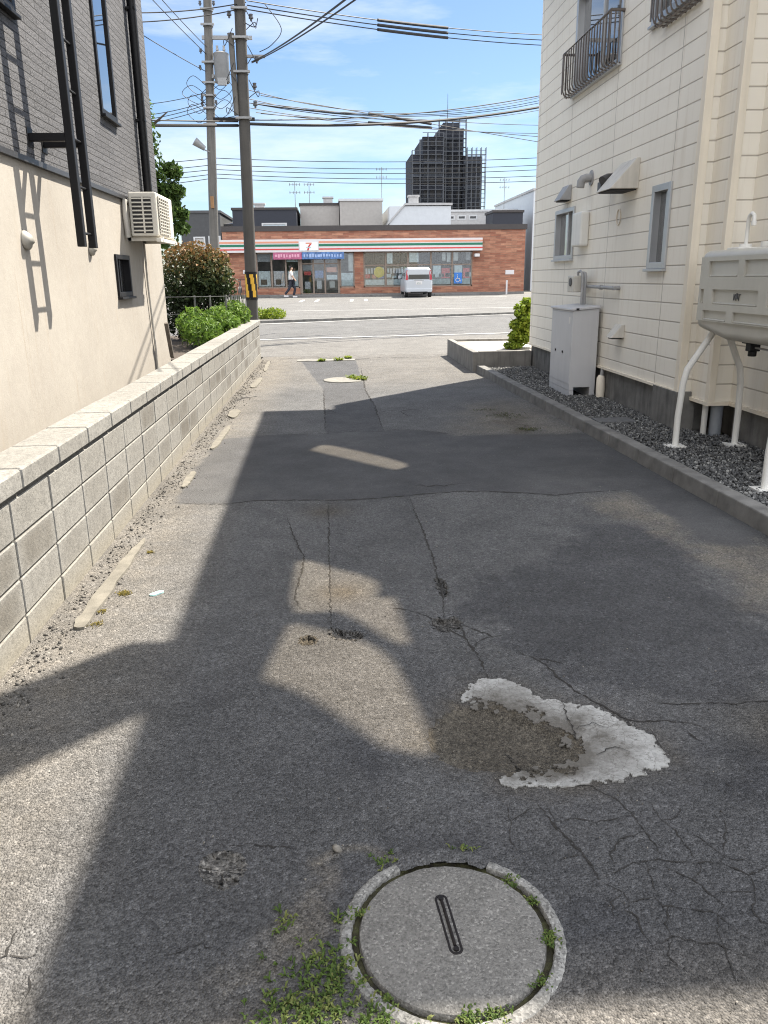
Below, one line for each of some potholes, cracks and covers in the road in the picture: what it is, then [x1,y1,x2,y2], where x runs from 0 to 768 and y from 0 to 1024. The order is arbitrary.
crack [175,483,627,679]
crack [518,650,768,757]
crack [506,783,768,984]
manhole cover [339,861,567,1024]
pothole [327,627,365,642]
pothole [427,707,577,775]
pothole [198,850,248,891]
